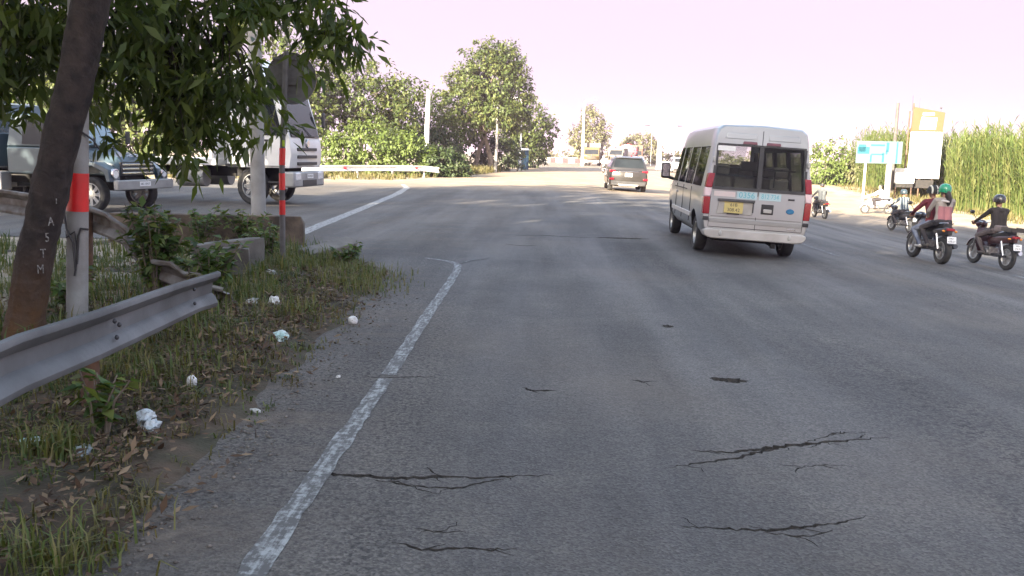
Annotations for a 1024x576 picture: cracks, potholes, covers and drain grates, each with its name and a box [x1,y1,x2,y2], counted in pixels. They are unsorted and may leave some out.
crack [682,516,872,546]
crack [670,431,871,473]
crack [399,522,517,556]
crack [293,467,554,494]
